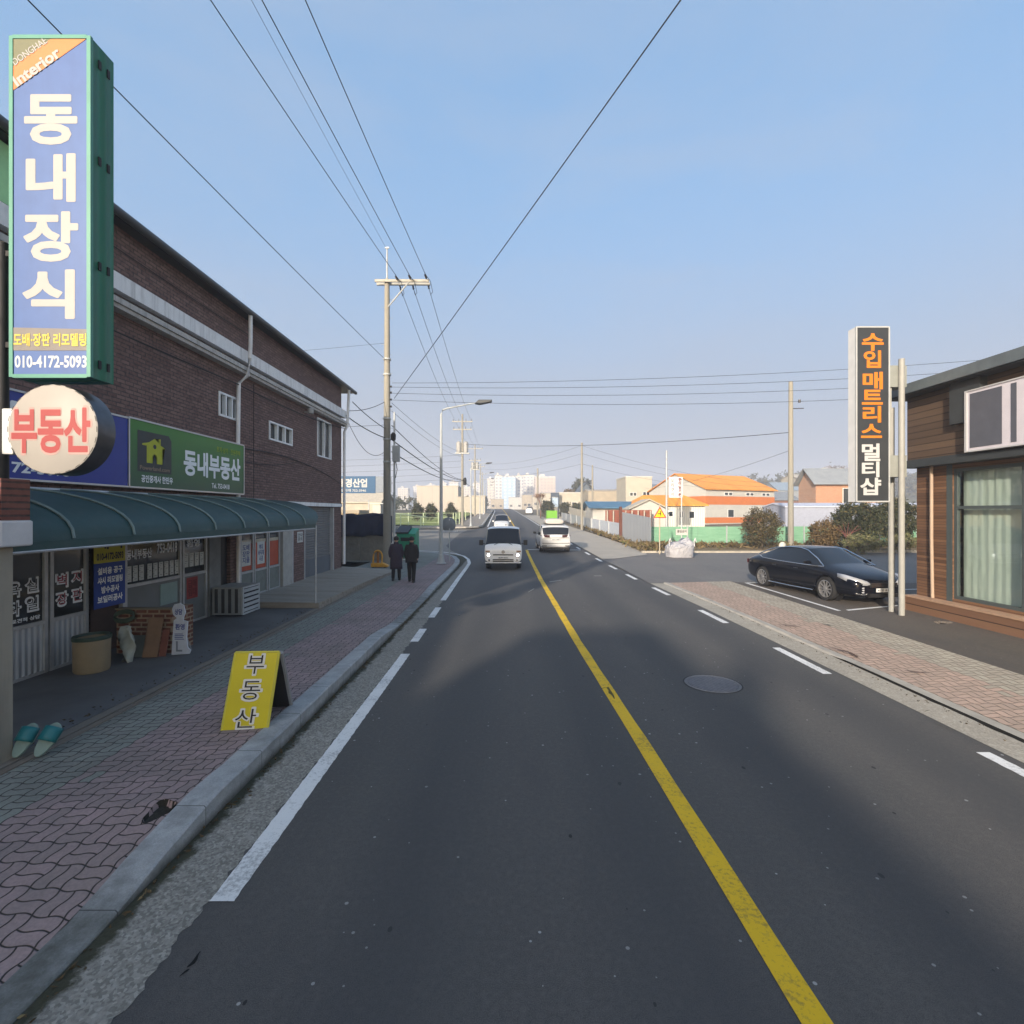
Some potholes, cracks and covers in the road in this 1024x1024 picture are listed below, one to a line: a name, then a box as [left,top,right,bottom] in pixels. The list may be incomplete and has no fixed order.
pothole [142,799,177,823]
manhole cover [683,675,743,694]
